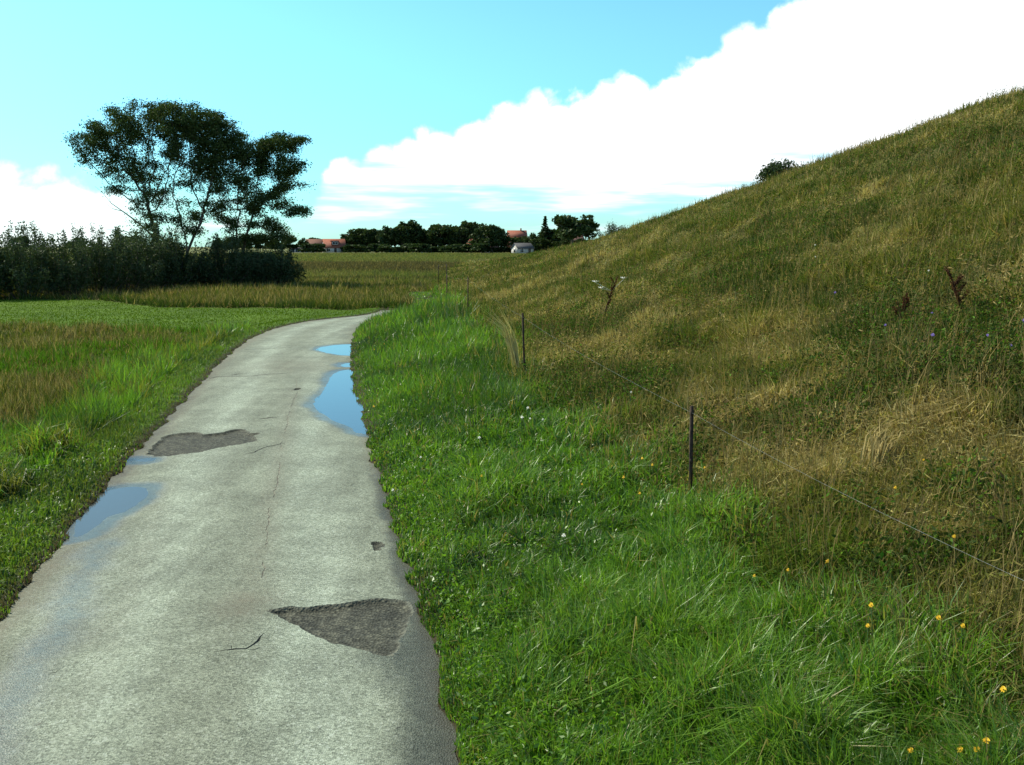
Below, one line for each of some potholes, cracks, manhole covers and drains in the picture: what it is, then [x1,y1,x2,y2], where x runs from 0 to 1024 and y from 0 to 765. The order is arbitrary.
crack [209,373,298,578]
crack [216,634,263,652]
